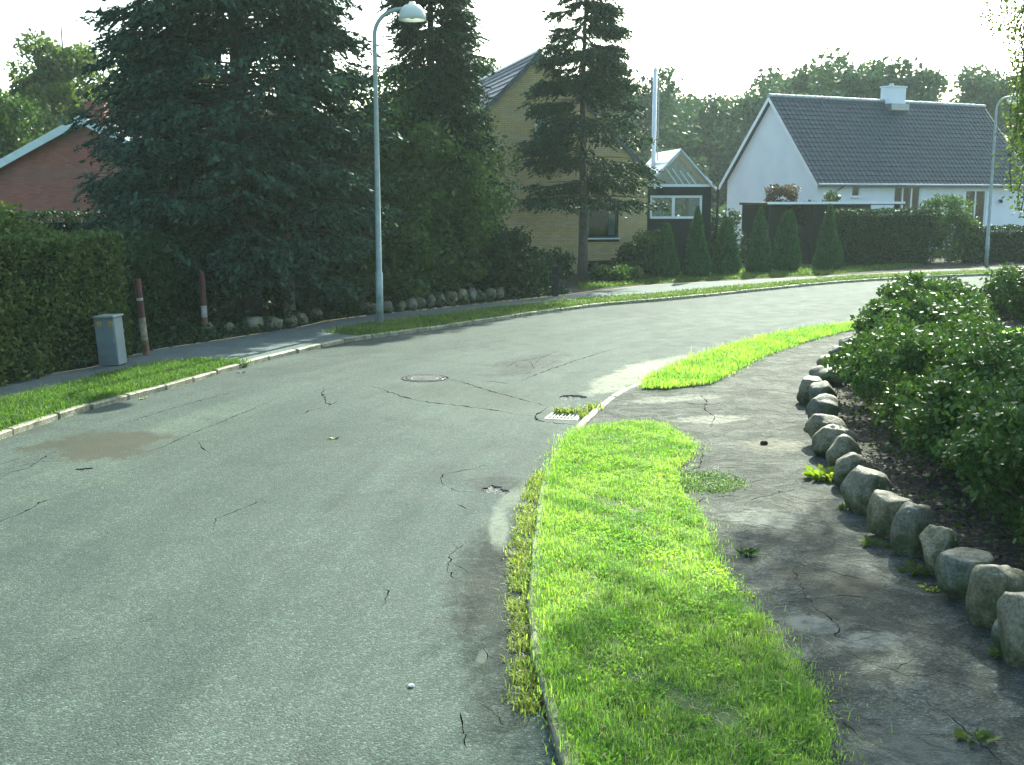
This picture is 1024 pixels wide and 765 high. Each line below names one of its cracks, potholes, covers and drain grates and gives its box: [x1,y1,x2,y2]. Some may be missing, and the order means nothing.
pothole [482,485,509,494]
crack [376,356,578,425]
drain grate [544,412,582,420]
crack [783,562,954,676]
crack [901,693,1002,765]
crack [117,387,280,460]
crack [460,702,504,751]
